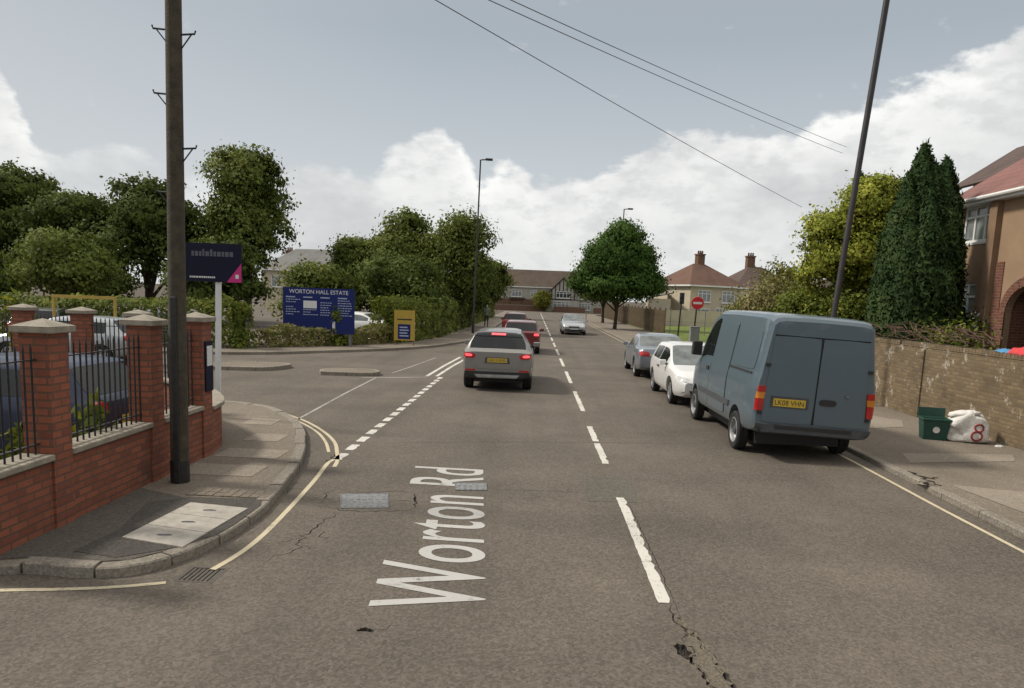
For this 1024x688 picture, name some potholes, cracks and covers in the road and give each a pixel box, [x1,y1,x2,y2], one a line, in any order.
manhole cover [340,493,389,508]
manhole cover [455,482,487,491]
manhole cover [122,502,248,548]
drain grate [174,566,229,583]
pothole [673,643,696,661]
crack [266,490,445,562]
crack [908,471,942,486]
